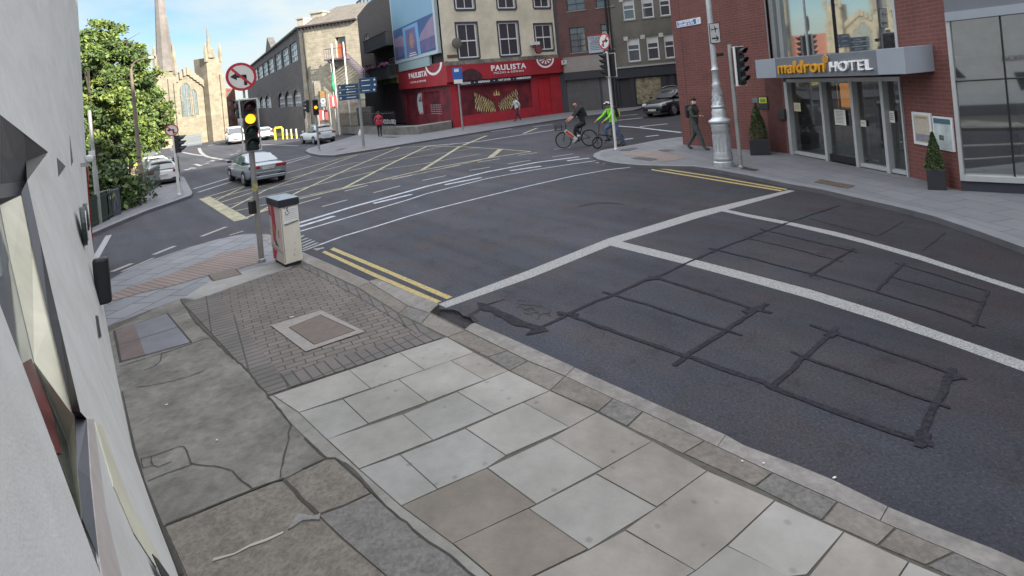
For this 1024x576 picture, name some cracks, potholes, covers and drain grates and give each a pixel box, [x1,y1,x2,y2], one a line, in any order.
pothole [439,309,475,329]
crack [516,299,551,319]
manhole cover [271,310,365,351]
manhole cover [815,179,854,189]
